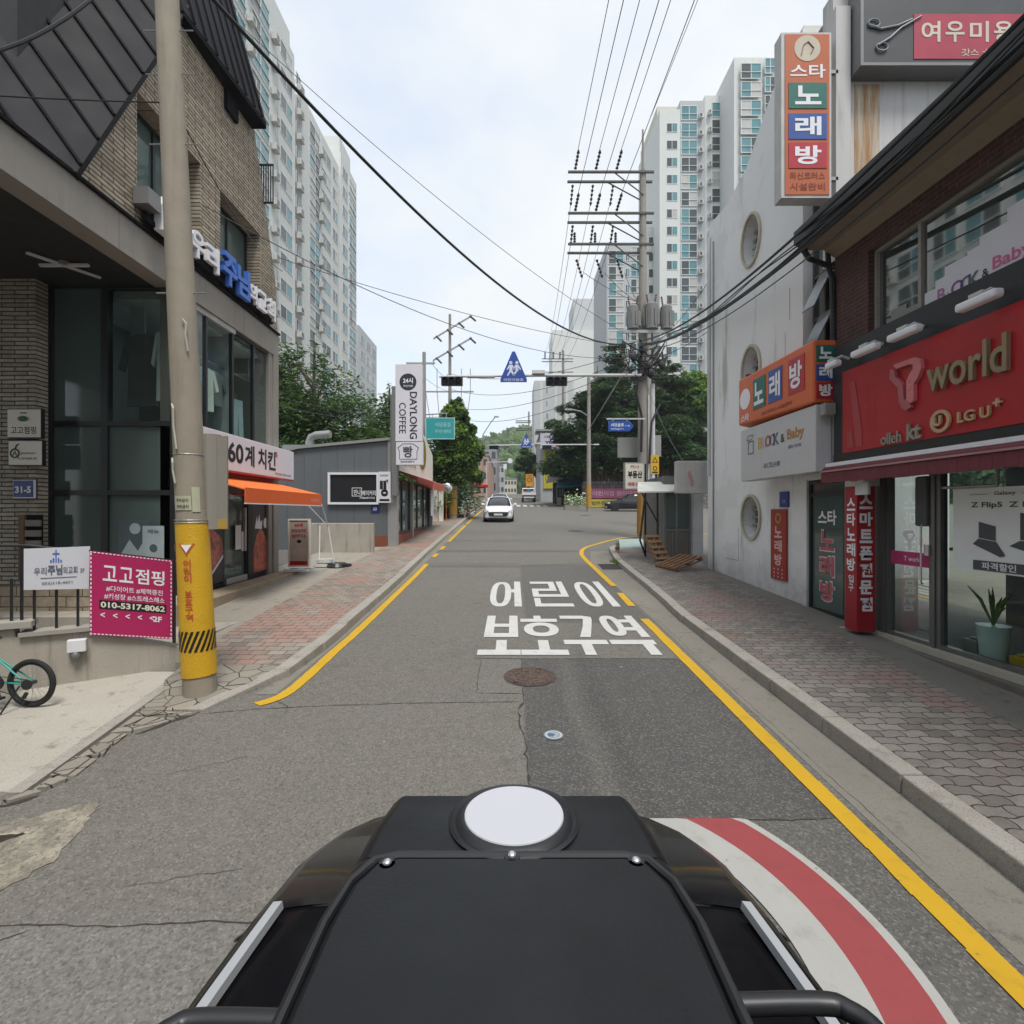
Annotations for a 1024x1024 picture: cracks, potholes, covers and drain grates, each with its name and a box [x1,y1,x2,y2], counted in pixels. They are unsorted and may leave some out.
manhole cover [504,667,556,686]
crack [0,920,252,940]
crack [109,868,242,889]
